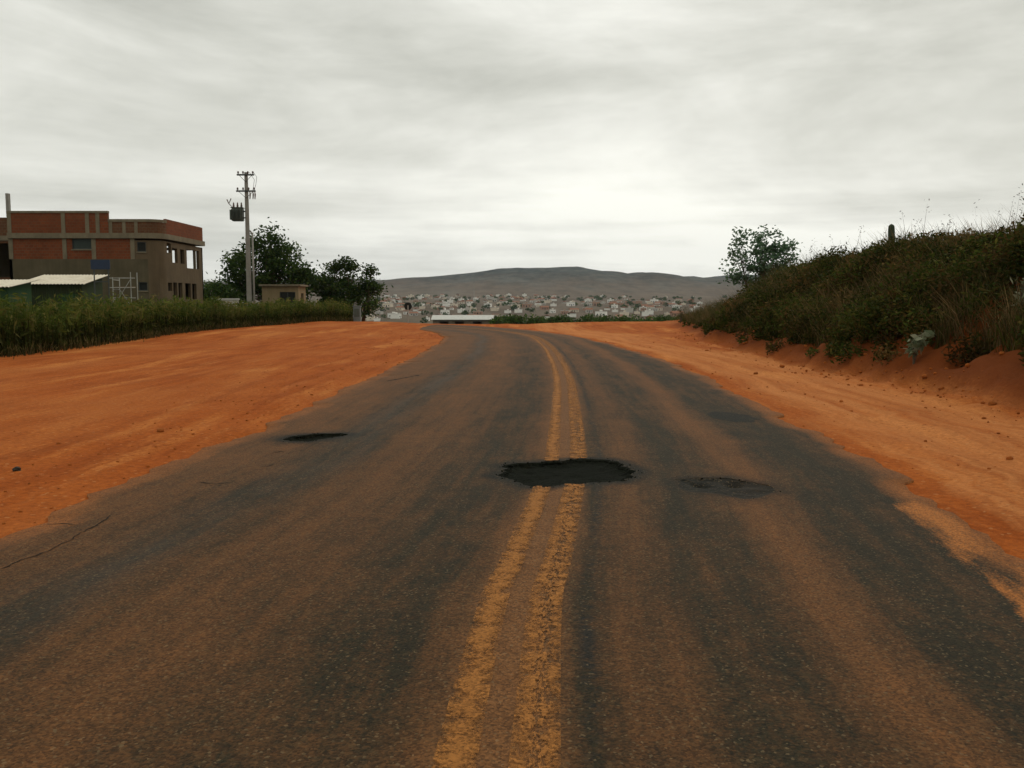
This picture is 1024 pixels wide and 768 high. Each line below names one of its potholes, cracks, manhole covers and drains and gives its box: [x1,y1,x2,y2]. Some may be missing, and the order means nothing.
pothole [675,476,781,499]
pothole [496,458,643,488]
crack [1,515,110,569]
pothole [283,433,348,442]
